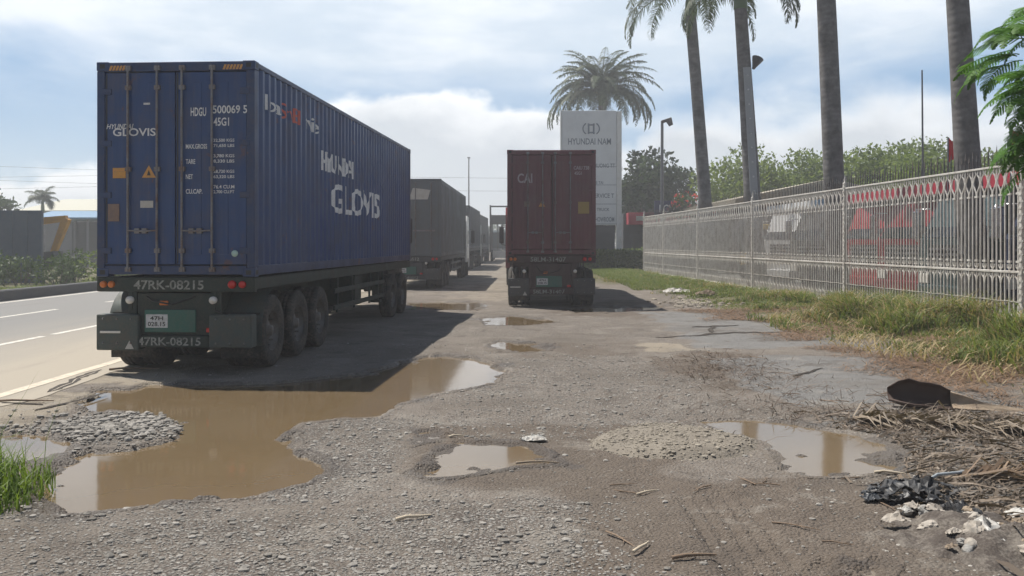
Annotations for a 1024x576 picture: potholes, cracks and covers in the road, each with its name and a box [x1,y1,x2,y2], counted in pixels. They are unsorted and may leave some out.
pothole [475,315,563,326]
pothole [20,352,517,519]
pothole [397,438,569,481]
pothole [482,339,556,353]
pothole [685,416,912,479]
crack [656,325,795,338]
